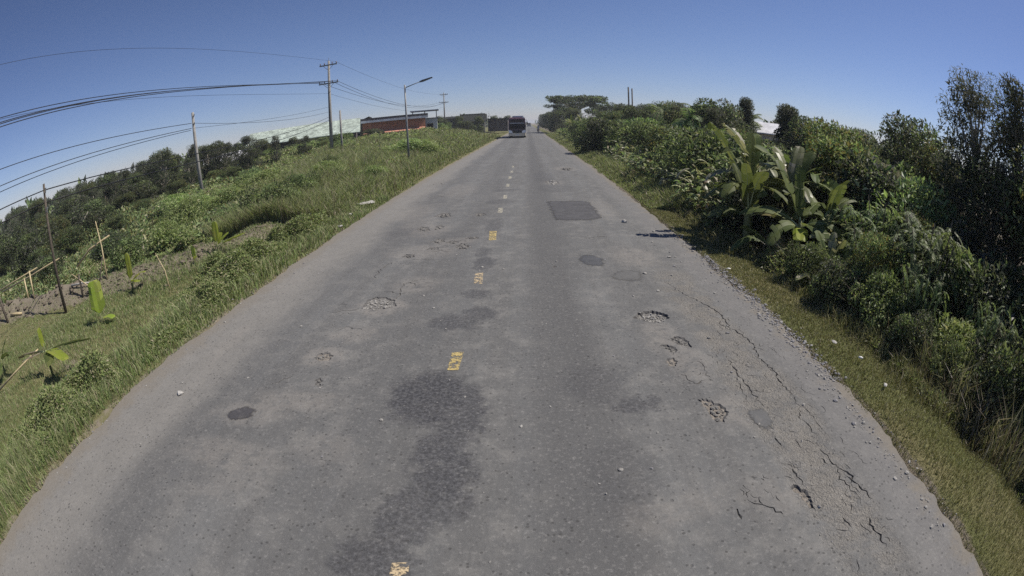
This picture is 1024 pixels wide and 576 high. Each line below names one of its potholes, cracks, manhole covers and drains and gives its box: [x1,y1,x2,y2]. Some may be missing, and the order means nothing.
pothole [670,336,692,348]
pothole [698,398,729,422]
pothole [633,310,670,323]
pothole [361,297,397,311]
pothole [314,352,333,361]
crack [668,283,892,570]
